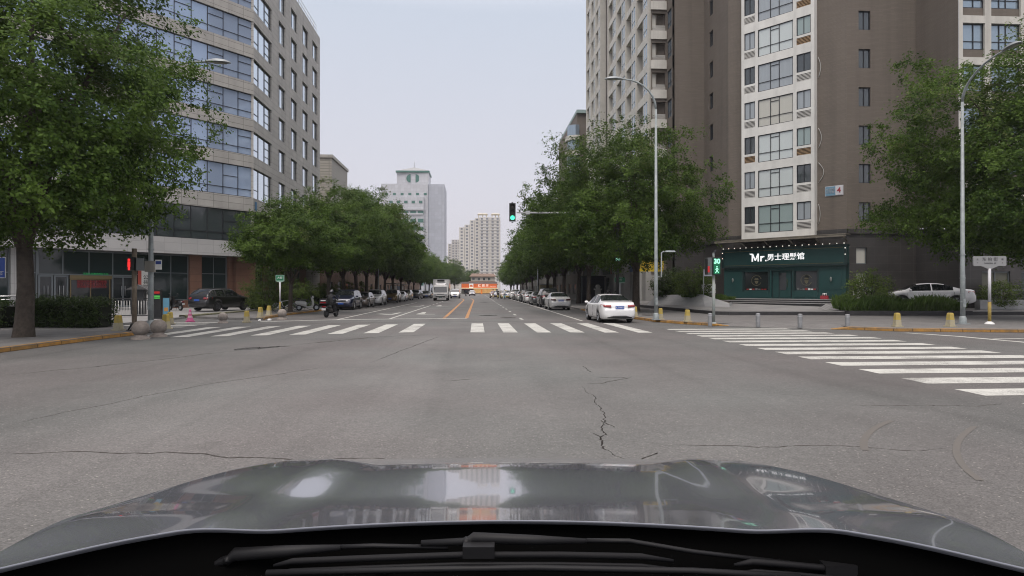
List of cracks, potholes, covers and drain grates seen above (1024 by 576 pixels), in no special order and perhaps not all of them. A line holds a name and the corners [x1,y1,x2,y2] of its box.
crack [16,451,384,460]
crack [583,366,658,459]
crack [18,368,316,423]
crack [24,335,437,374]
